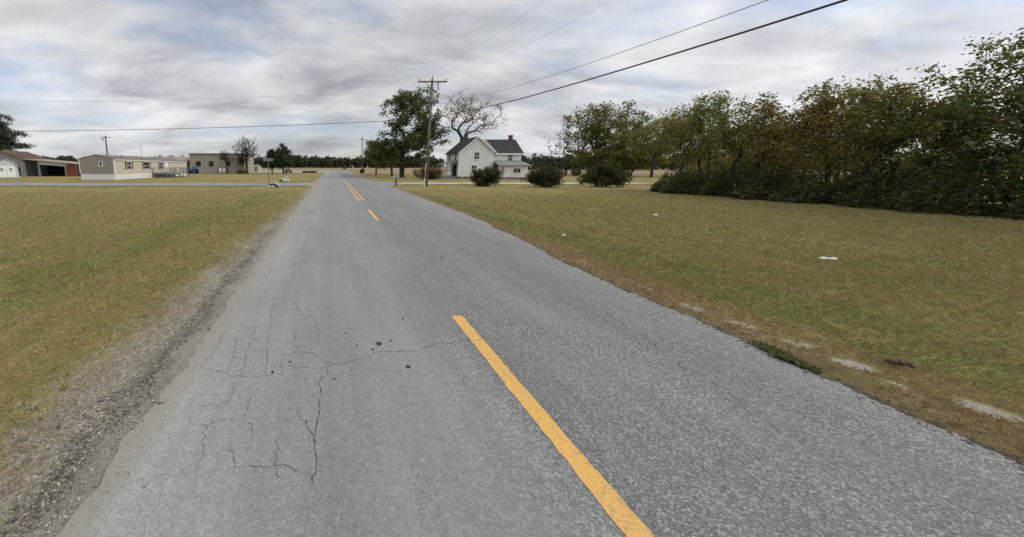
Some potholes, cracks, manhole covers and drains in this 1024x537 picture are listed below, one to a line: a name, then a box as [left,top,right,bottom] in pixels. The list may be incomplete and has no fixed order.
crack [559,300,741,402]
crack [202,297,471,484]
